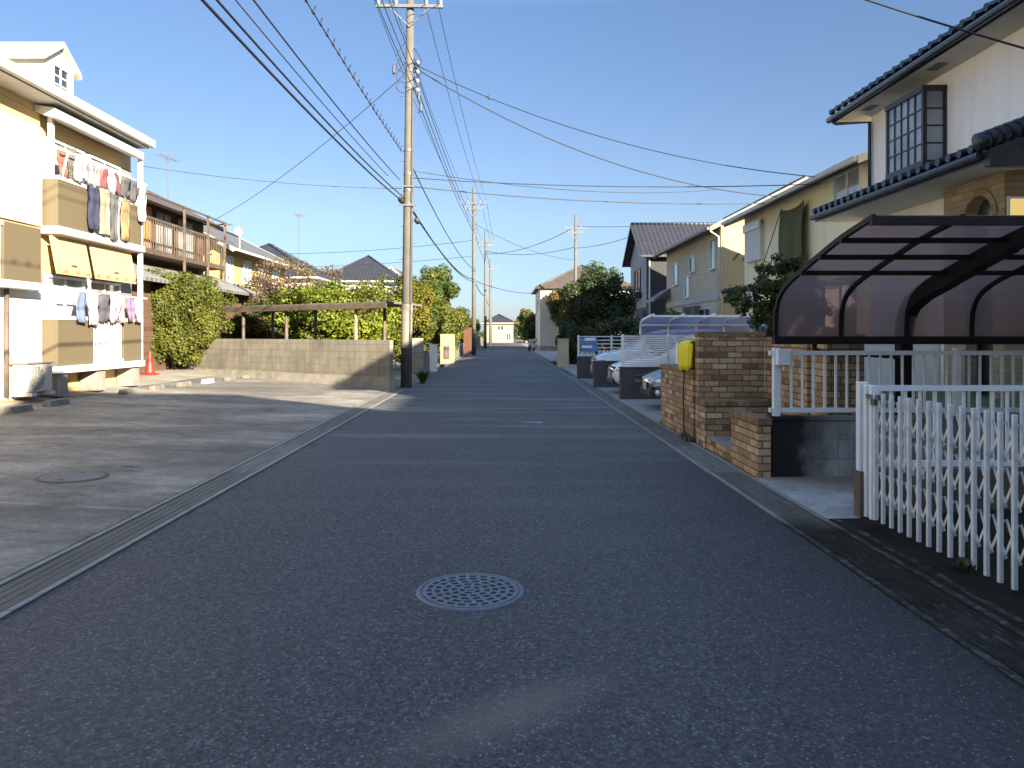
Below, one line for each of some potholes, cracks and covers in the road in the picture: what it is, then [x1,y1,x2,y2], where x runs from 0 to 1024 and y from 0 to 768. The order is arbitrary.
manhole cover [34,470,109,483]
manhole cover [416,573,525,611]
